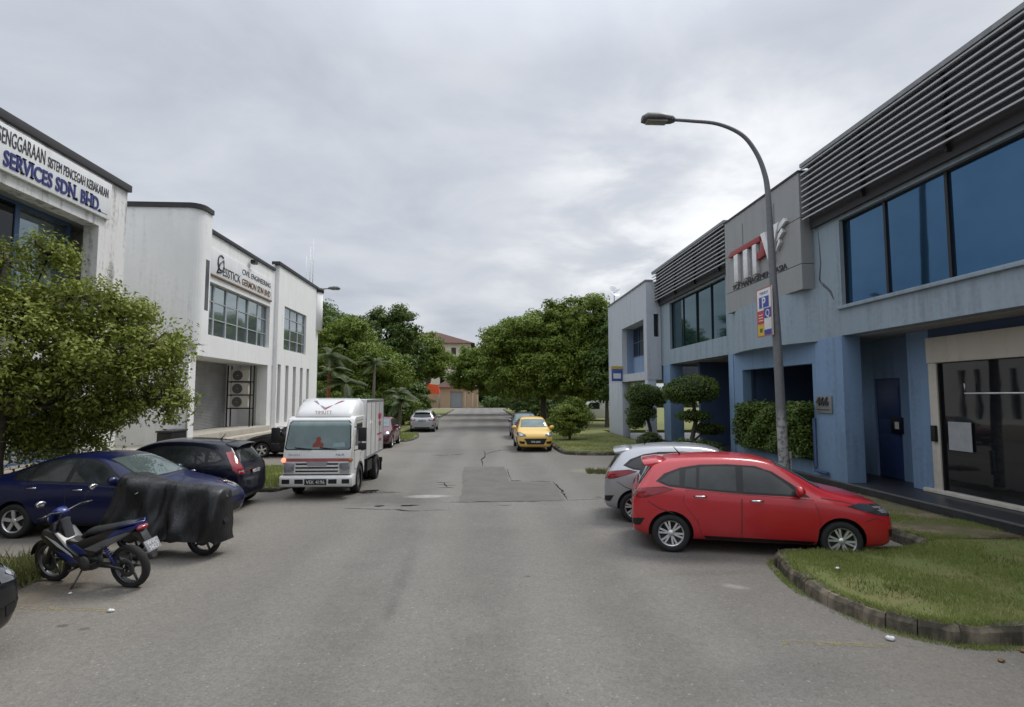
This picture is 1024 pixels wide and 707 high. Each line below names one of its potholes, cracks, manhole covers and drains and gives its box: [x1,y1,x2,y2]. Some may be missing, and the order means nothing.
crack [482,481,605,502]
